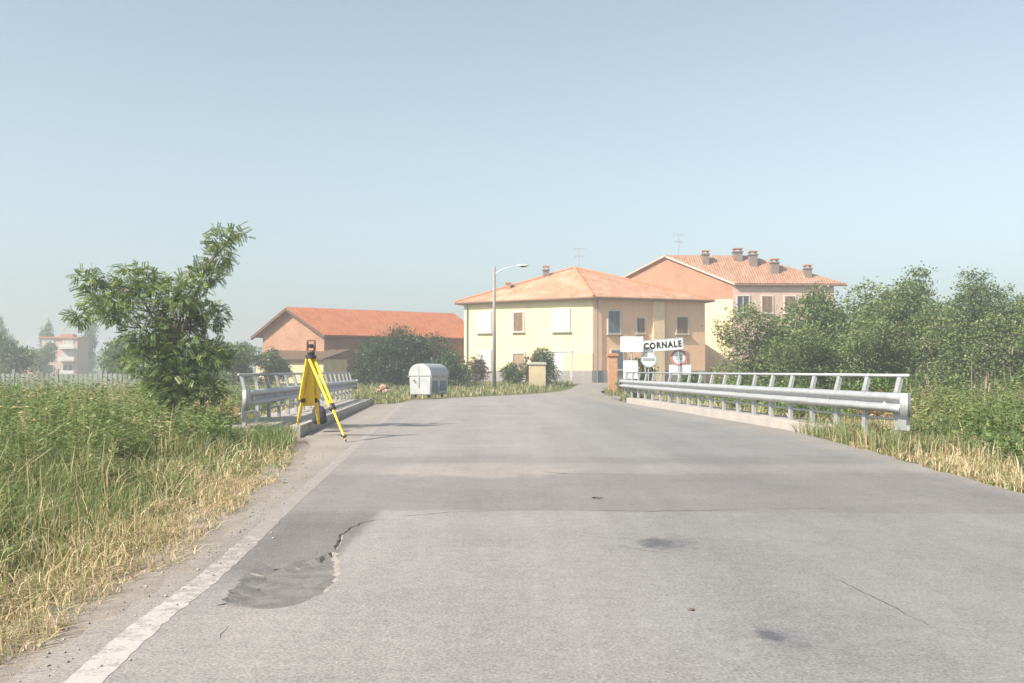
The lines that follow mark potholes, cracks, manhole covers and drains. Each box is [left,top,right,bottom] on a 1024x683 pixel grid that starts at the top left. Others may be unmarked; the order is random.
pothole [215,552,341,609]
crack [827,575,936,629]
